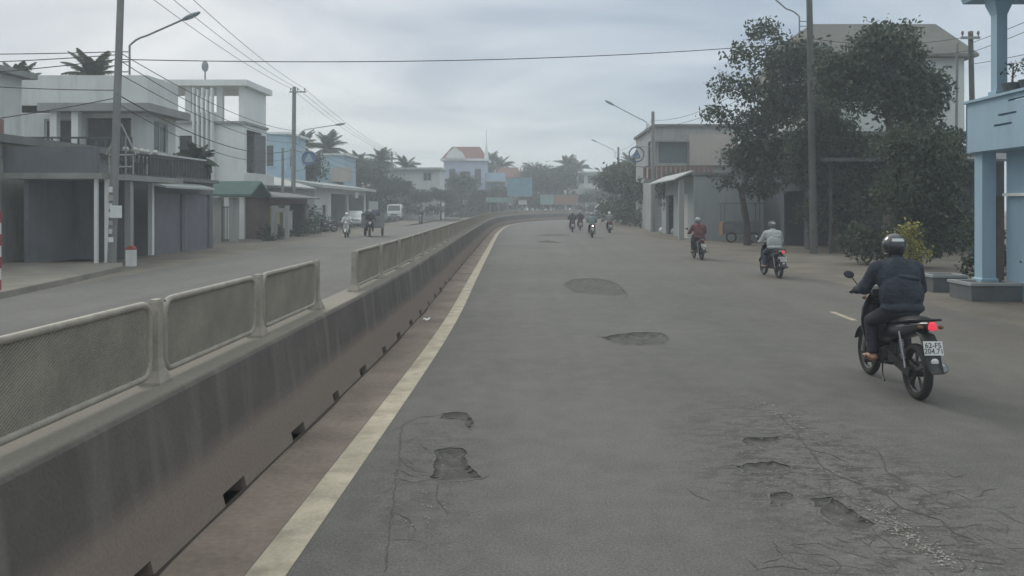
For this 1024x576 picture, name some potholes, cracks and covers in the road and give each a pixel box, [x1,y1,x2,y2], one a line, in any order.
crack [719,414,1024,574]
pothole [767,491,796,506]
pothole [734,461,793,474]
pothole [600,332,671,346]
crack [384,415,489,571]
pothole [809,496,880,532]
pothole [562,278,628,296]
pothole [438,412,475,429]
pothole [740,436,781,446]
pothole [428,447,483,482]
